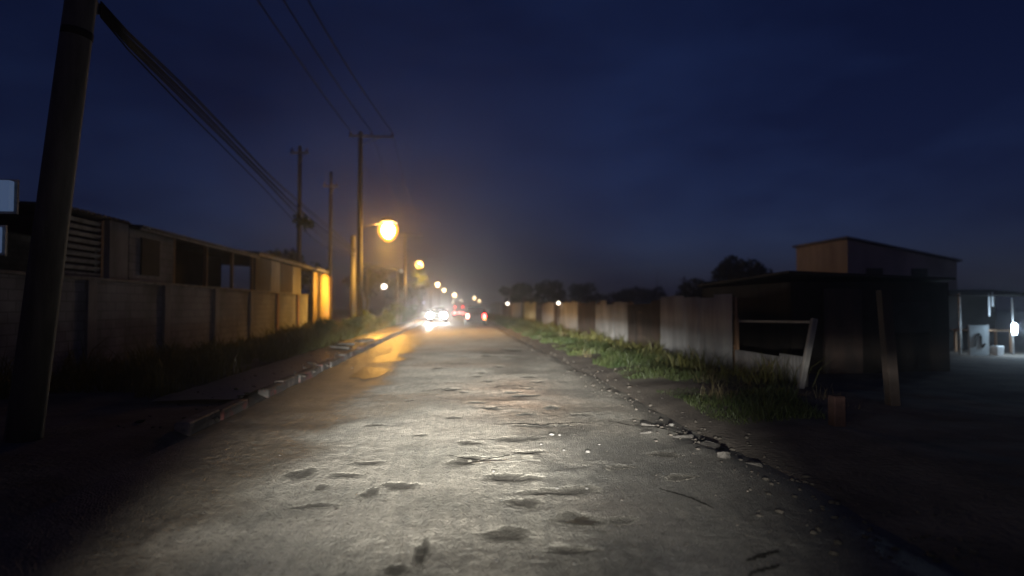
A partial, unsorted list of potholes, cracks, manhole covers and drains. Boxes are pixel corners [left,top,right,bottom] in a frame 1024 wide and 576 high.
pothole [503,498,544,510]
pothole [280,467,318,481]
pothole [376,483,421,491]
pothole [475,526,532,543]
pothole [483,473,546,483]
pothole [444,456,484,467]
pothole [285,503,340,511]
crack [746,550,780,576]
crack [659,488,713,508]
pothole [516,485,604,497]
pothole [357,488,380,499]
pothole [412,537,431,570]
